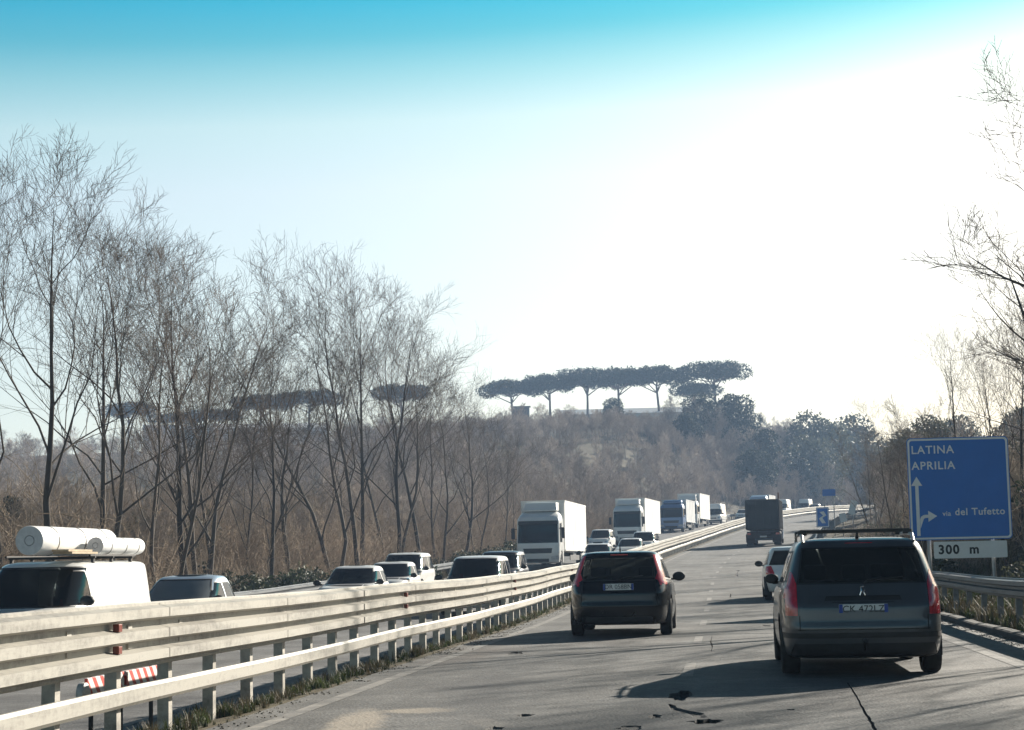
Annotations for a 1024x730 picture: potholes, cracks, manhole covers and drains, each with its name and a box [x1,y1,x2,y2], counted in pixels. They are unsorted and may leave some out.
crack [847,683,877,730]
pothole [668,690,692,701]
